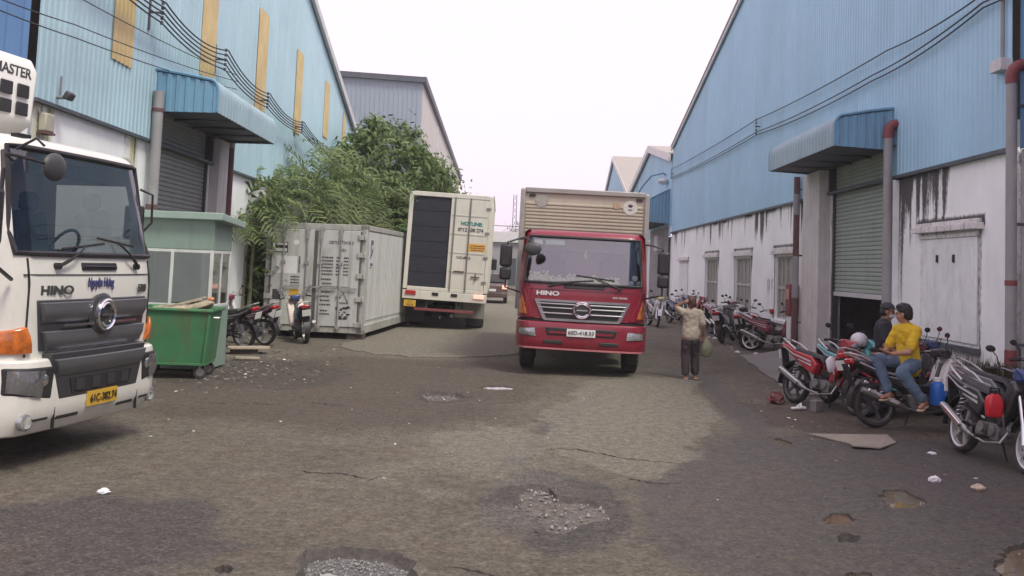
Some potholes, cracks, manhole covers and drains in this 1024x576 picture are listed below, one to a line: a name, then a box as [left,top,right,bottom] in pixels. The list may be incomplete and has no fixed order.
crack [287,468,379,482]
pothole [283,543,430,576]
crack [551,447,682,487]
pothole [981,539,1024,576]
pothole [411,391,471,403]
pothole [826,530,872,546]
pothole [868,488,938,511]
pothole [502,482,628,537]
pothole [813,510,866,527]
